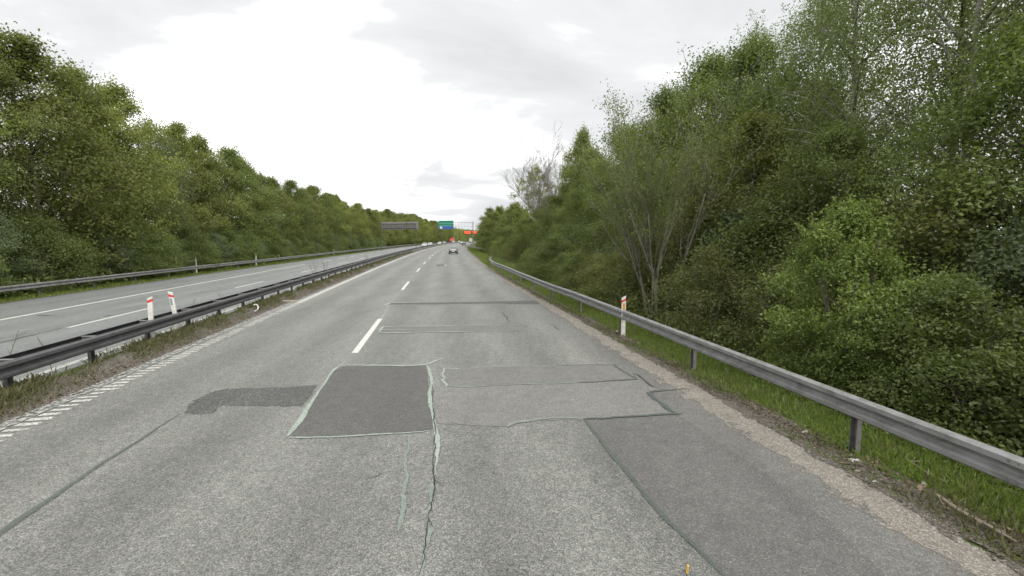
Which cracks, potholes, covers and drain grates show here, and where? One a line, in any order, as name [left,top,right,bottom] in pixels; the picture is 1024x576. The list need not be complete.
crack [418,365,441,576]
